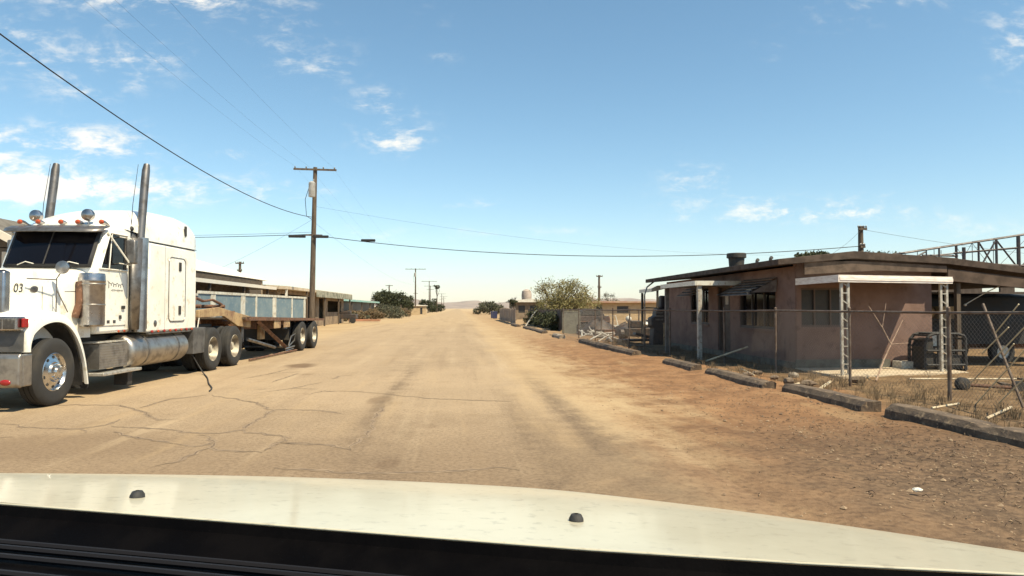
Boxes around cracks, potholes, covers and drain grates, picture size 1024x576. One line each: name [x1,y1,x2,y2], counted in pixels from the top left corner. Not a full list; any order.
crack [0,368,517,474]
